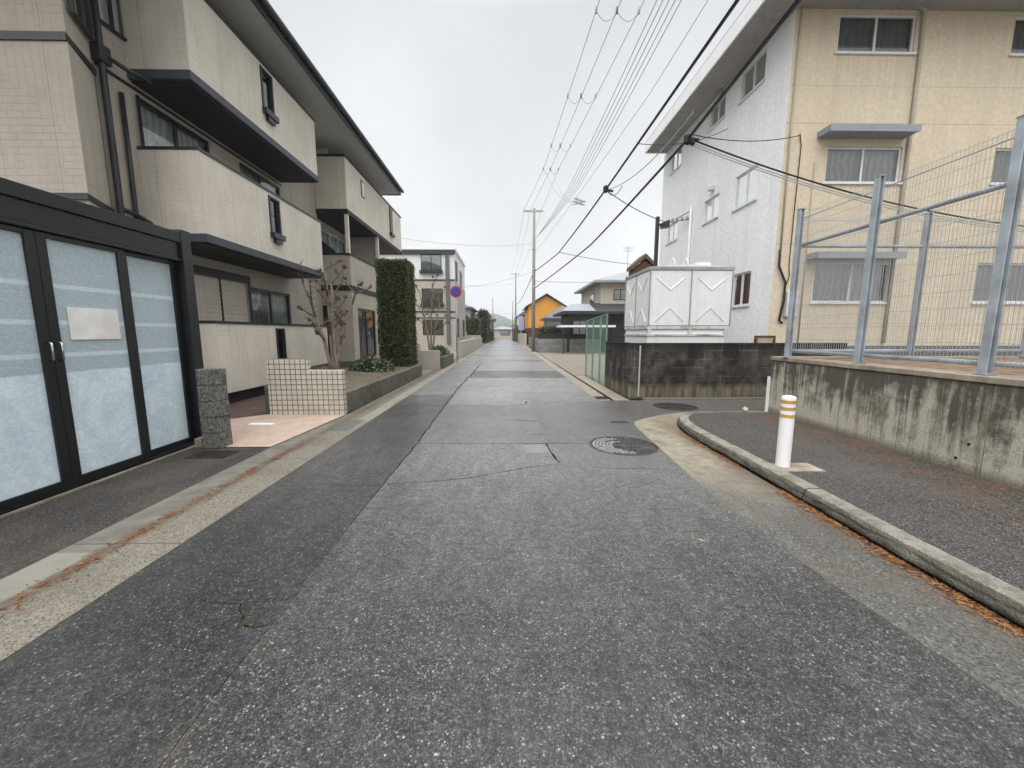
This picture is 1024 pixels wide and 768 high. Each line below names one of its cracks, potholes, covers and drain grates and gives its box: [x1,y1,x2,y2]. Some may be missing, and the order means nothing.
manhole cover [588,436,660,456]
drain grate [185,450,239,459]
manhole cover [653,403,699,411]
